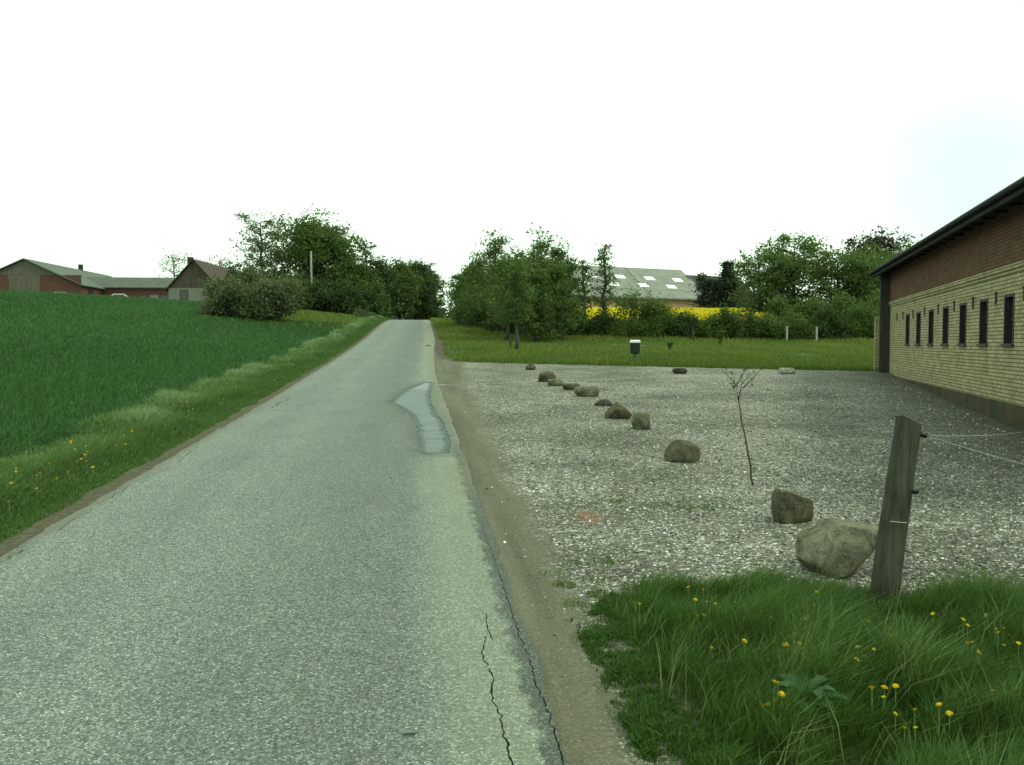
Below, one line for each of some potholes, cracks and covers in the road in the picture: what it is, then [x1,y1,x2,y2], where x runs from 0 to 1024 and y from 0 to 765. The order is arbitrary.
pothole [391,382,451,454]
crack [481,527,564,765]
